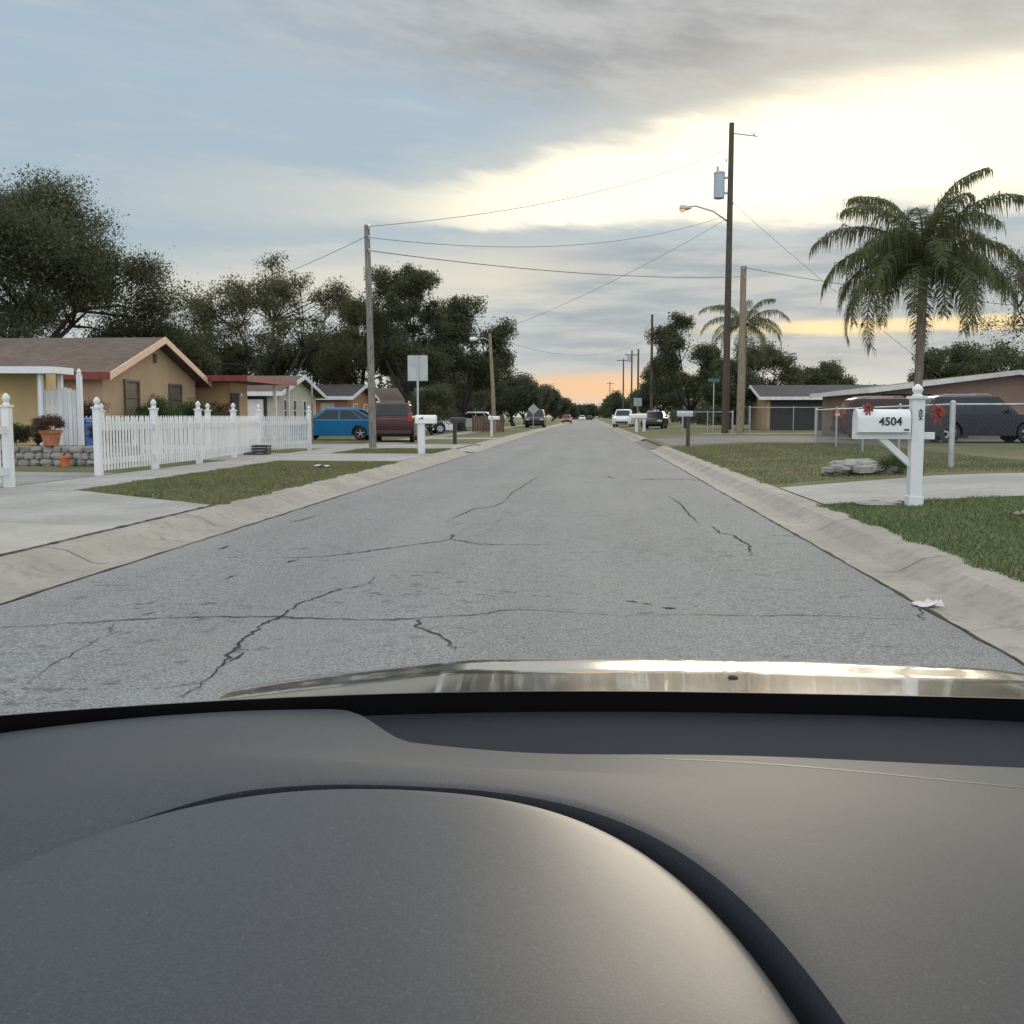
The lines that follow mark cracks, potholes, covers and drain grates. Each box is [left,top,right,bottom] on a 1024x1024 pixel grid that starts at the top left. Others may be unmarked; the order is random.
crack [0,577,608,697]
crack [670,497,753,555]
crack [252,534,554,562]
